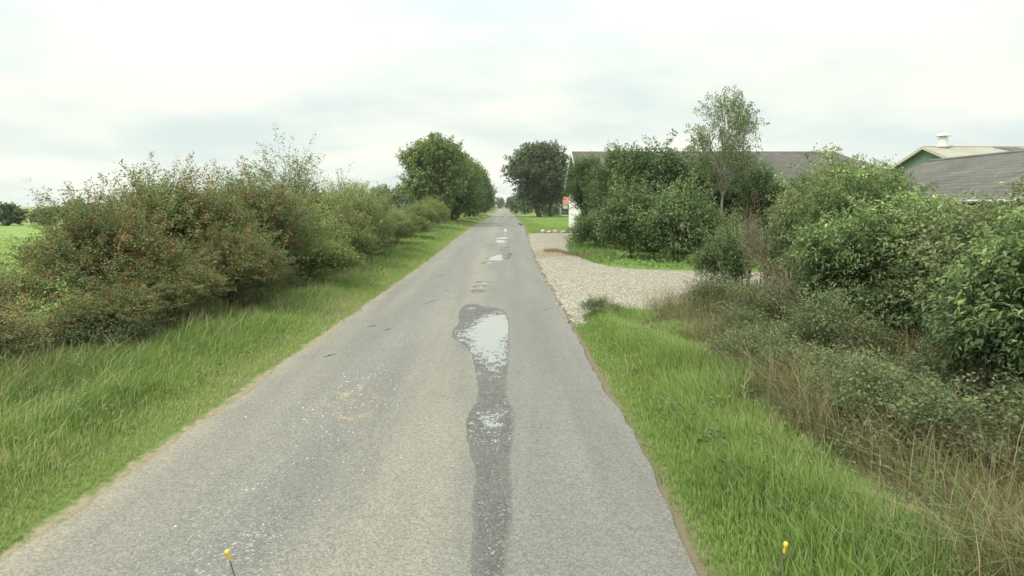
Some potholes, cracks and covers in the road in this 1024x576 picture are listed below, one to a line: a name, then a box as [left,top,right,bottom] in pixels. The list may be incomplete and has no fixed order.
pothole [486,252,512,260]
